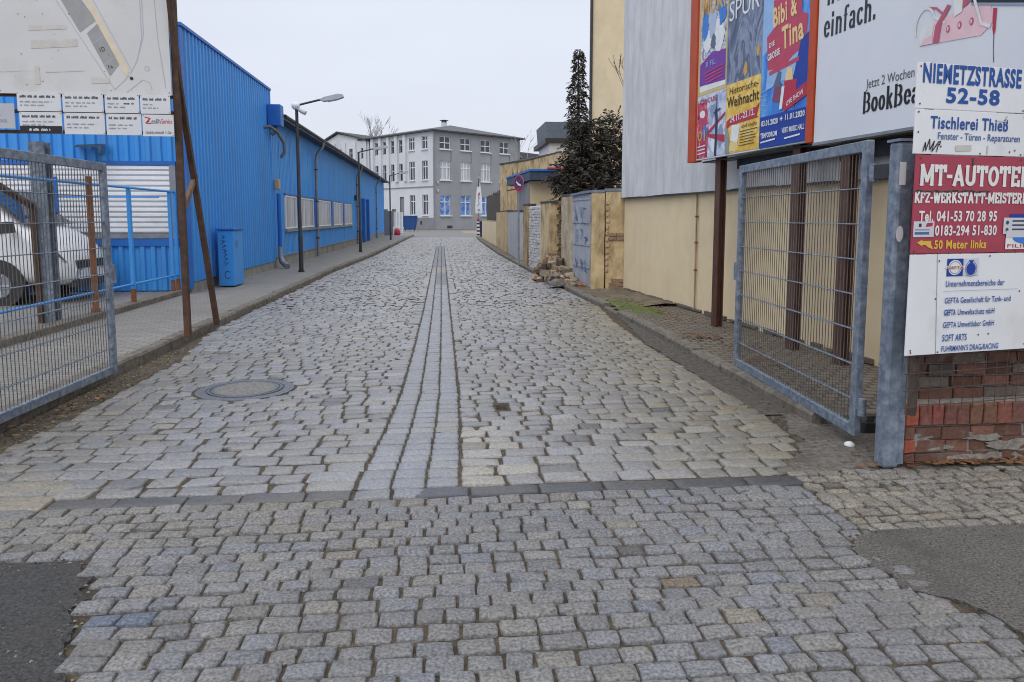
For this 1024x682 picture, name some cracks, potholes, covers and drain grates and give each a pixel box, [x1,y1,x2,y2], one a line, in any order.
manhole cover [195,379,294,402]
